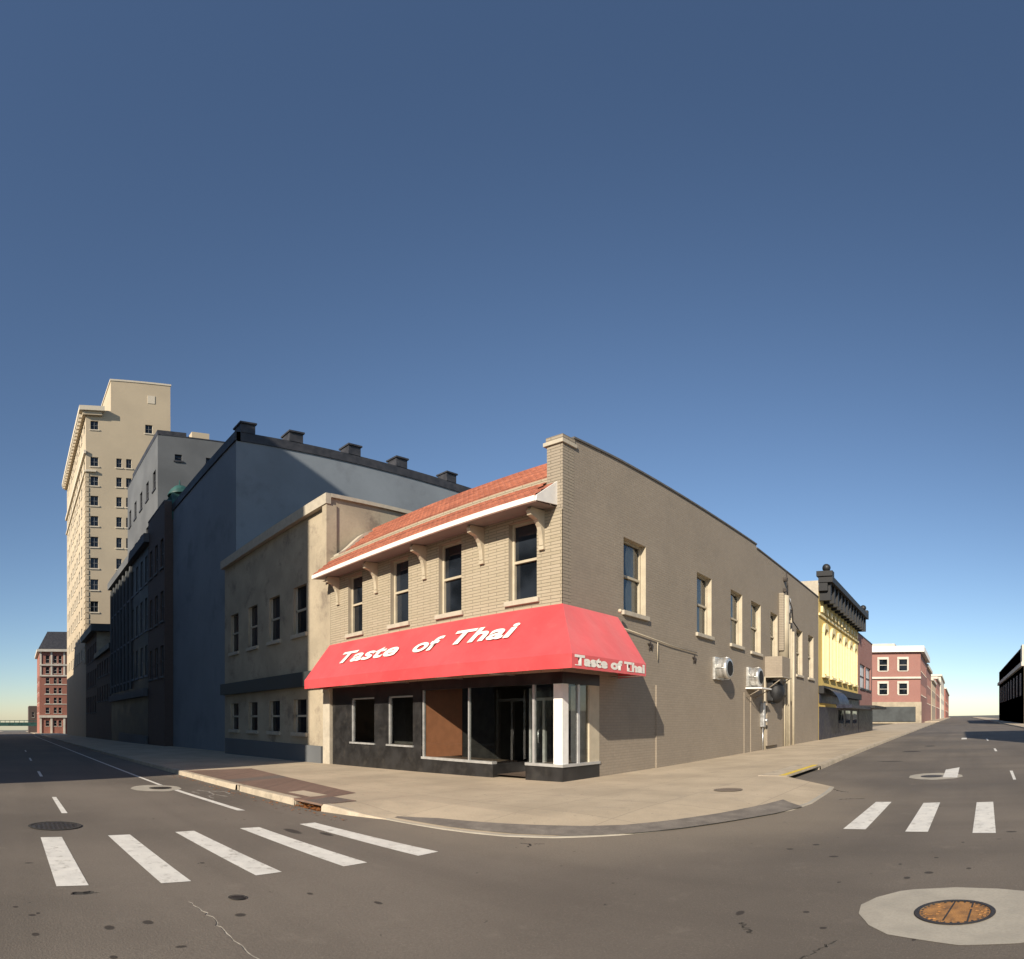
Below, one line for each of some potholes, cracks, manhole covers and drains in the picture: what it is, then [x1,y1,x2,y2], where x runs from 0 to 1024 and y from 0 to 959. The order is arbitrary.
crack [800,940,837,959]
manhole cover [28,821,82,830]
crack [190,902,259,959]
manhole cover [859,887,1024,945]
